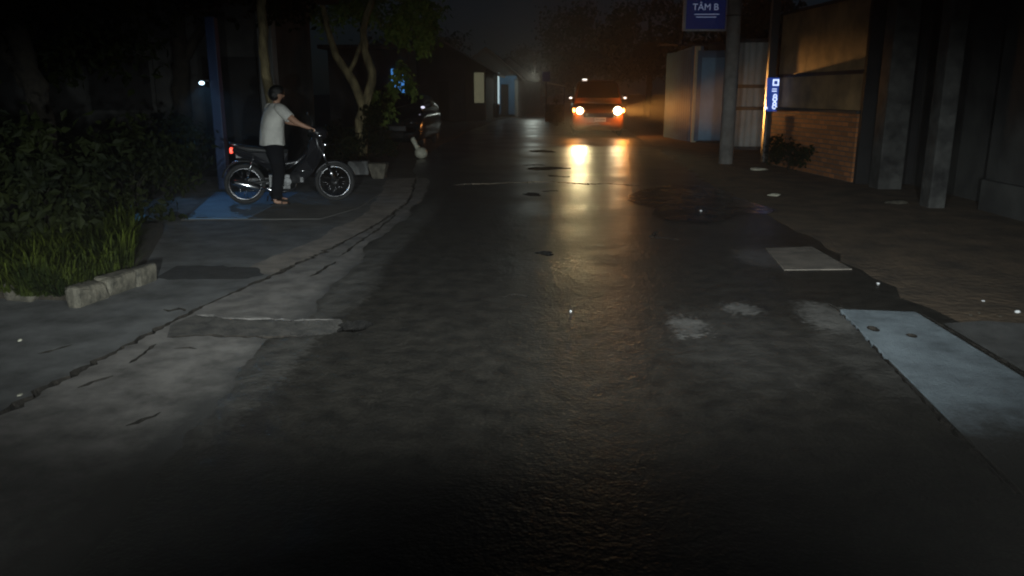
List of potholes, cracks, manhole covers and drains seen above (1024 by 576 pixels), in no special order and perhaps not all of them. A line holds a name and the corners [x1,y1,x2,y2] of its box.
crack [0,178,416,426]
